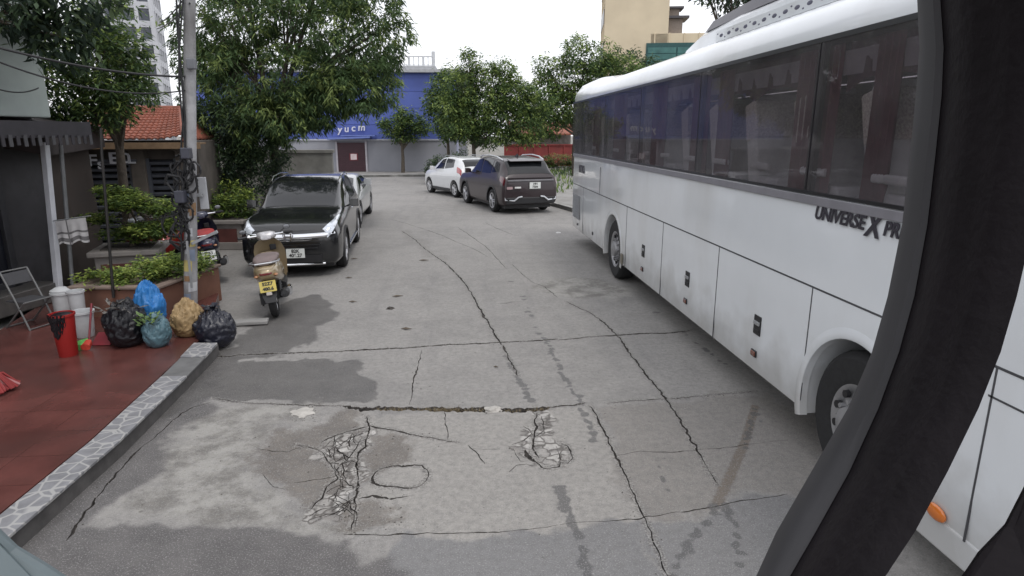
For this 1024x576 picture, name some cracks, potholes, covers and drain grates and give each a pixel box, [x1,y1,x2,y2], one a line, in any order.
crack [259,412,486,530]
crack [66,402,210,541]
crack [388,218,786,485]
